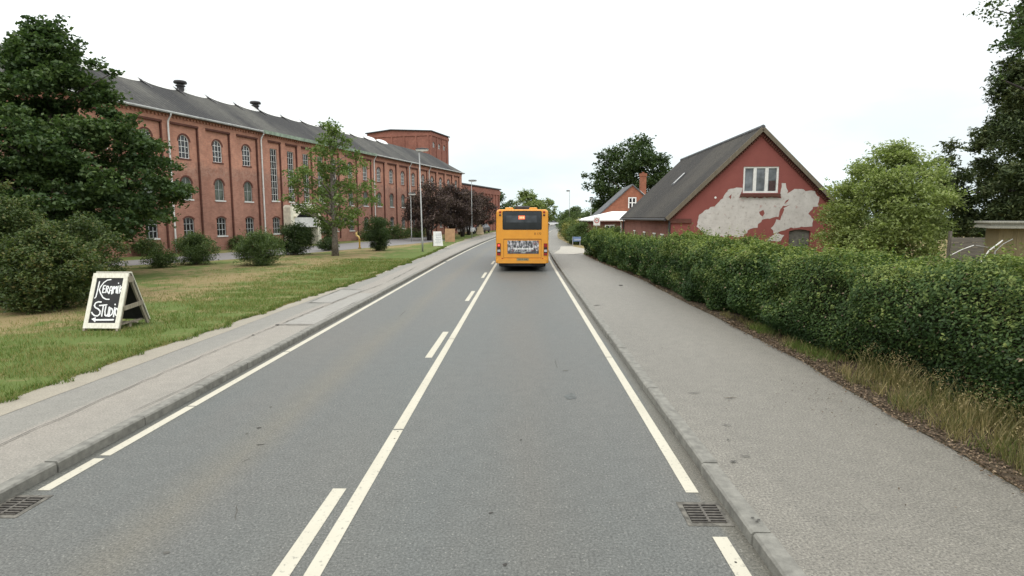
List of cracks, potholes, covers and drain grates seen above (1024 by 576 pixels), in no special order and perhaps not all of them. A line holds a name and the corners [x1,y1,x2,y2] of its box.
drain grate [0,495,54,518]
drain grate [676,502,735,527]
